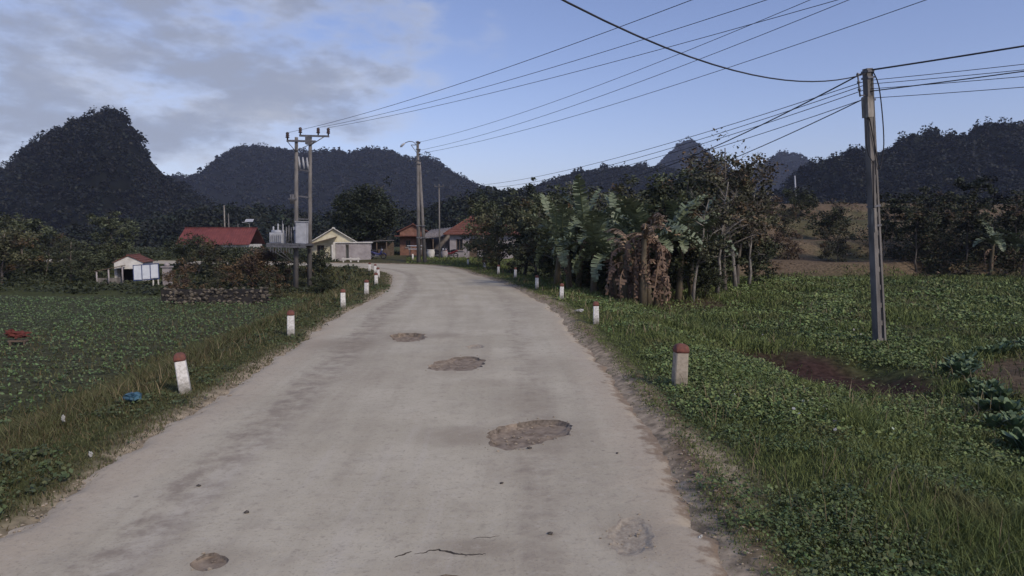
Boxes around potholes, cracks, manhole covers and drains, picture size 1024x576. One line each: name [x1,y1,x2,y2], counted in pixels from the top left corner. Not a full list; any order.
pothole [390,333,427,342]
pothole [425,355,486,372]
pothole [190,552,229,571]
pothole [479,416,574,454]
crack [394,536,495,558]
